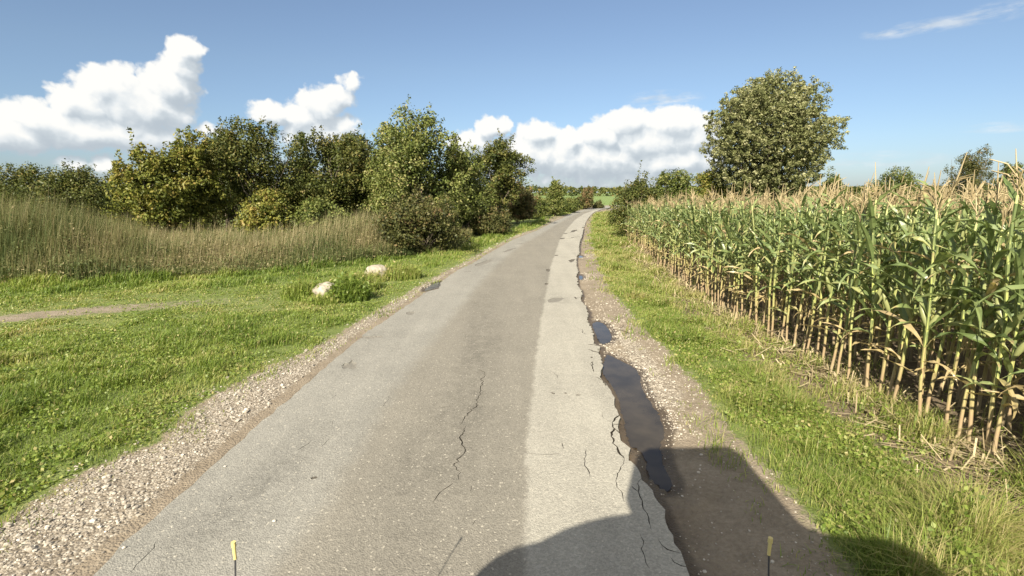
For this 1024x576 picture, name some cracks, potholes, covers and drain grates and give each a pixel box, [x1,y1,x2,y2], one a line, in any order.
crack [435,370,485,499]
crack [602,415,686,569]
